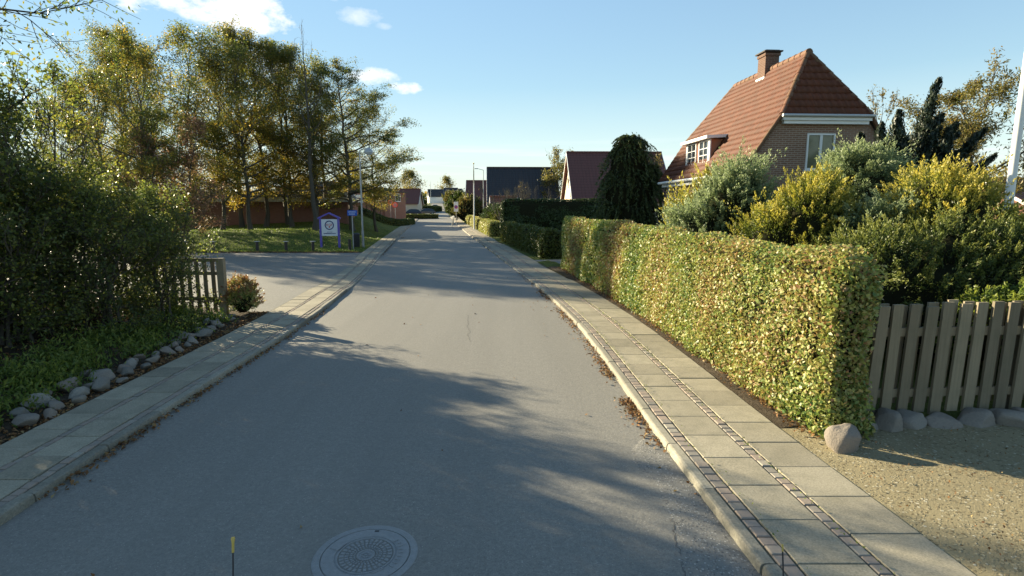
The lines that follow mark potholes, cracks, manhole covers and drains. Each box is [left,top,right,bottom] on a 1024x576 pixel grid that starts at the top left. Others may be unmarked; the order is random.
manhole cover [311,525,418,576]
